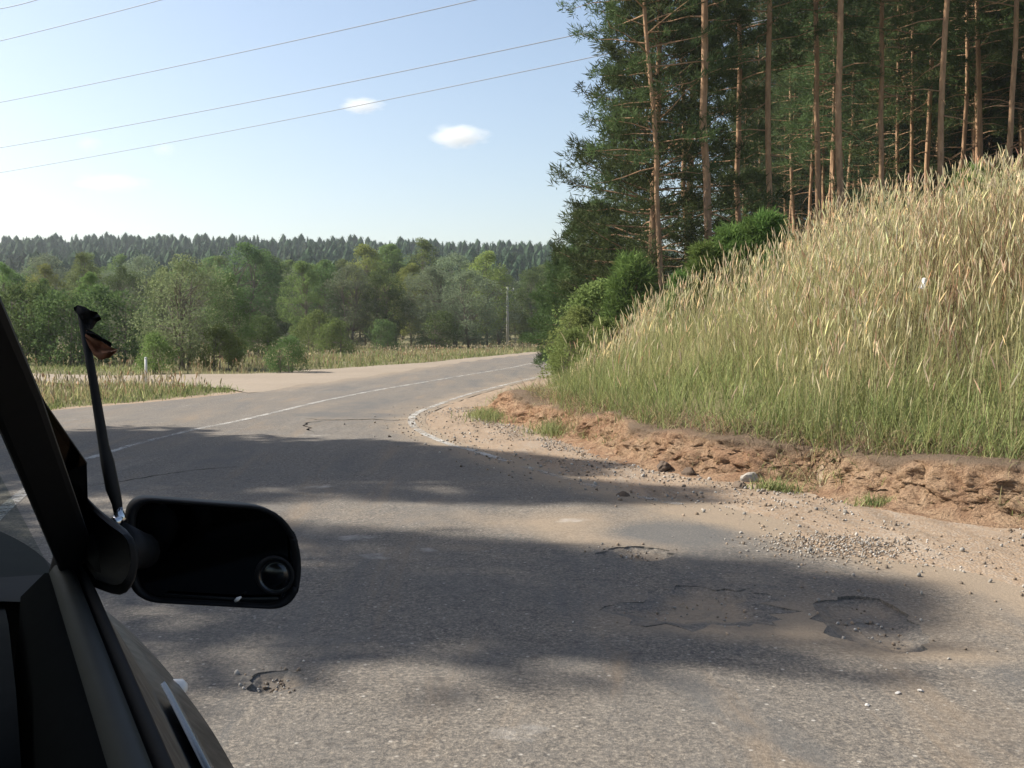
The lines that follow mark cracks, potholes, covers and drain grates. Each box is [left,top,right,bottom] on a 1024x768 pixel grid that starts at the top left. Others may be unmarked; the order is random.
pothole [810,596,931,654]
pothole [600,585,802,632]
pothole [246,670,305,694]
pothole [595,546,674,562]
crack [303,418,397,432]
crack [89,466,239,486]
